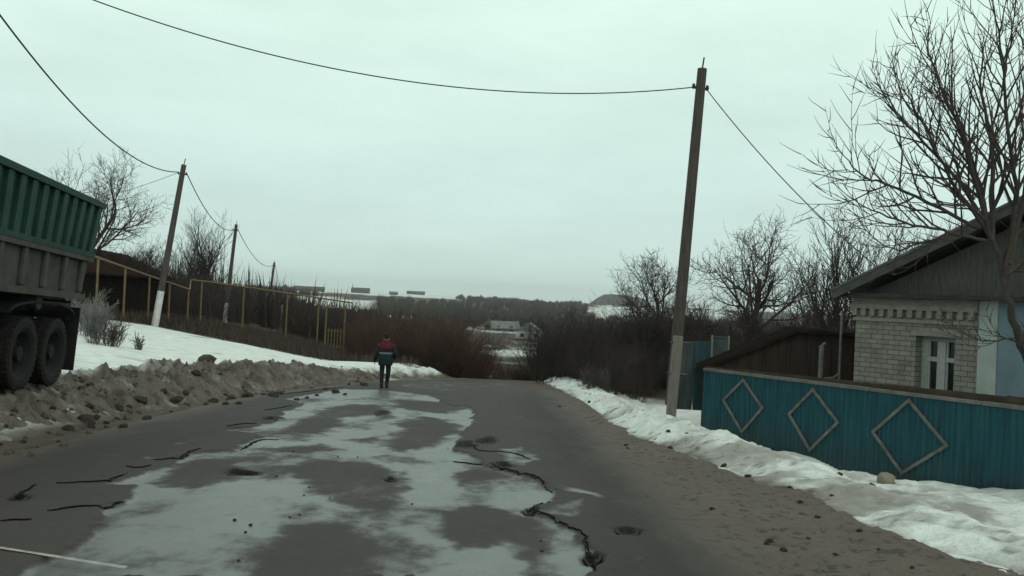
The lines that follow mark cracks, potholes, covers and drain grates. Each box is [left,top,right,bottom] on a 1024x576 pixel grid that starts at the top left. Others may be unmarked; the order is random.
crack [453,445,596,570]
pothole [615,527,639,535]
crack [56,448,201,483]
crack [227,387,341,450]
crack [0,484,125,521]
